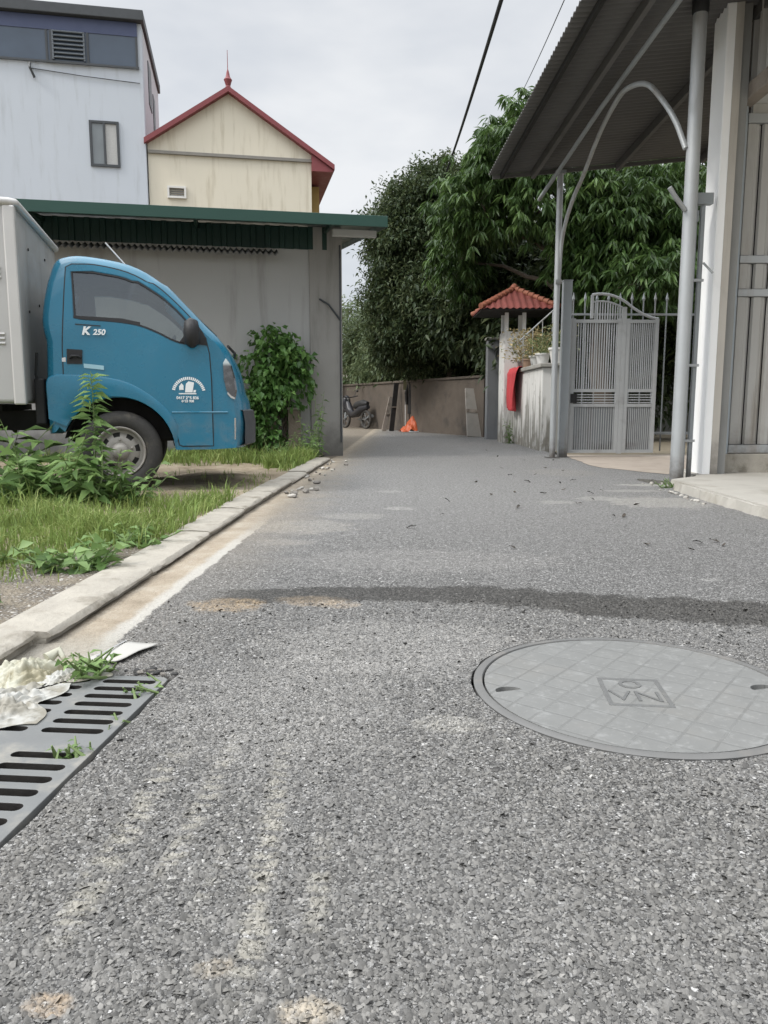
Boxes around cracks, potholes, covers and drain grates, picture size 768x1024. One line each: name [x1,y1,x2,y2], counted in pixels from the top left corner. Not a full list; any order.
drain grate [0,675,167,849]
manhole cover [474,638,768,761]
